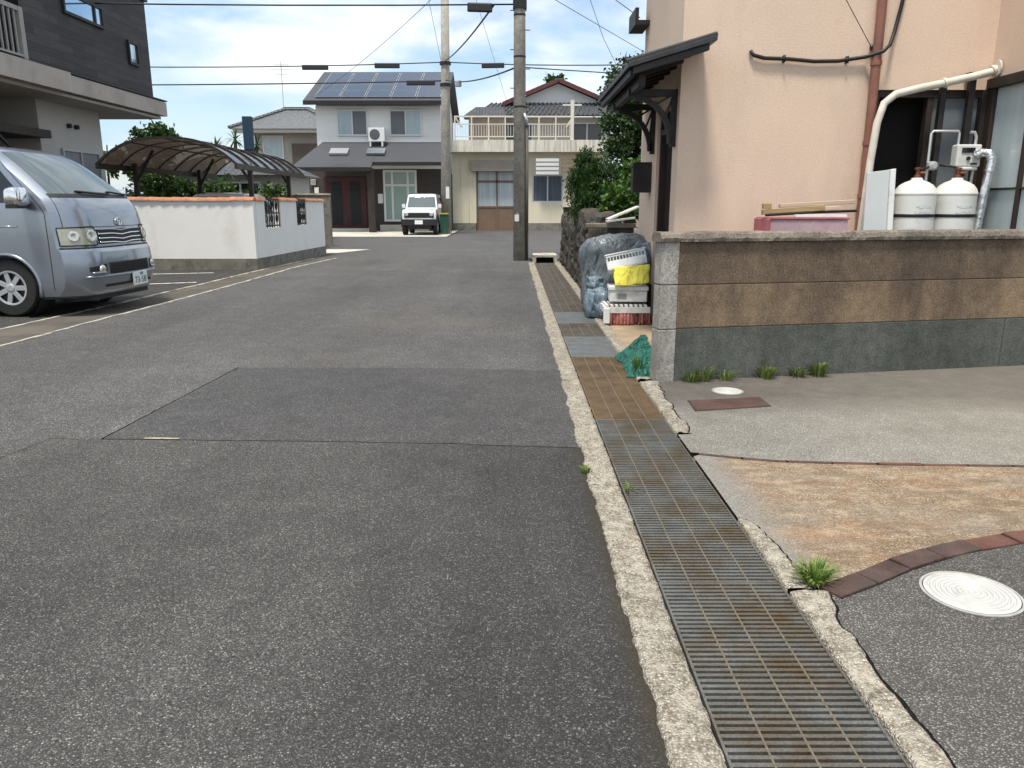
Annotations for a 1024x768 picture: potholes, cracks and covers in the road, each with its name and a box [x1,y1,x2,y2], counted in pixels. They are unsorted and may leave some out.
manhole cover [919,571,1024,618]
drain grate [595,419,704,478]
drain grate [658,582,911,768]
drain grate [617,476,779,583]
drain grate [550,302,585,312]
manhole cover [712,387,744,395]
drain grate [581,382,664,419]
drain grate [547,293,581,302]
drain grate [563,336,617,358]
drain grate [571,356,638,384]
drain grate [554,312,596,323]
drain grate [544,286,575,294]
